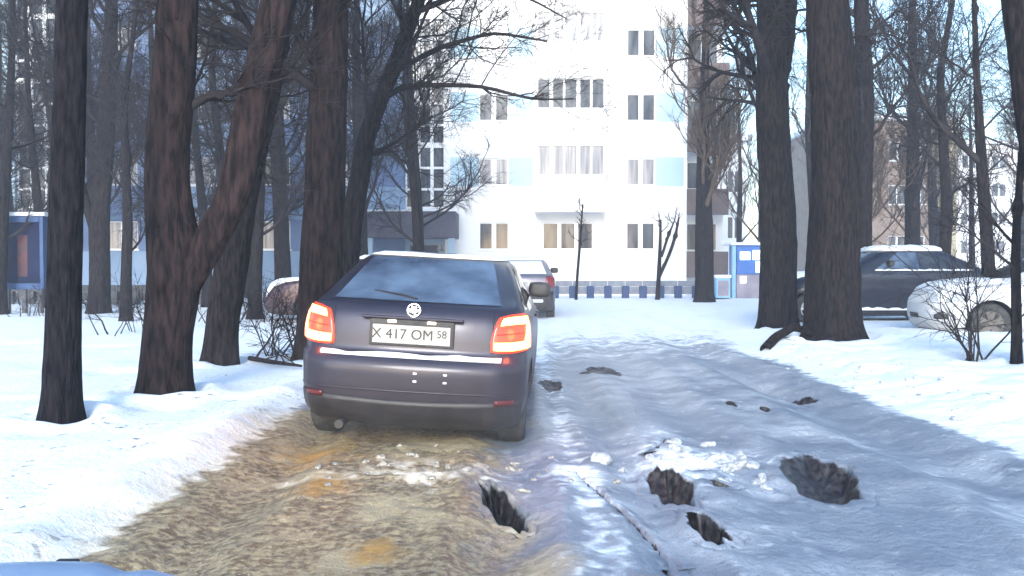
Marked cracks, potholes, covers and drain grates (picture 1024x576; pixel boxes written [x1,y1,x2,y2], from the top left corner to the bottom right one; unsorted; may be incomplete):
pothole [753,405,777,414]
pothole [469,478,539,540]
pothole [775,392,829,407]
pothole [633,460,713,513]
pothole [718,400,742,409]
pothole [763,450,878,513]
pothole [673,504,745,550]
pothole [571,364,632,378]
pothole [532,378,571,394]
